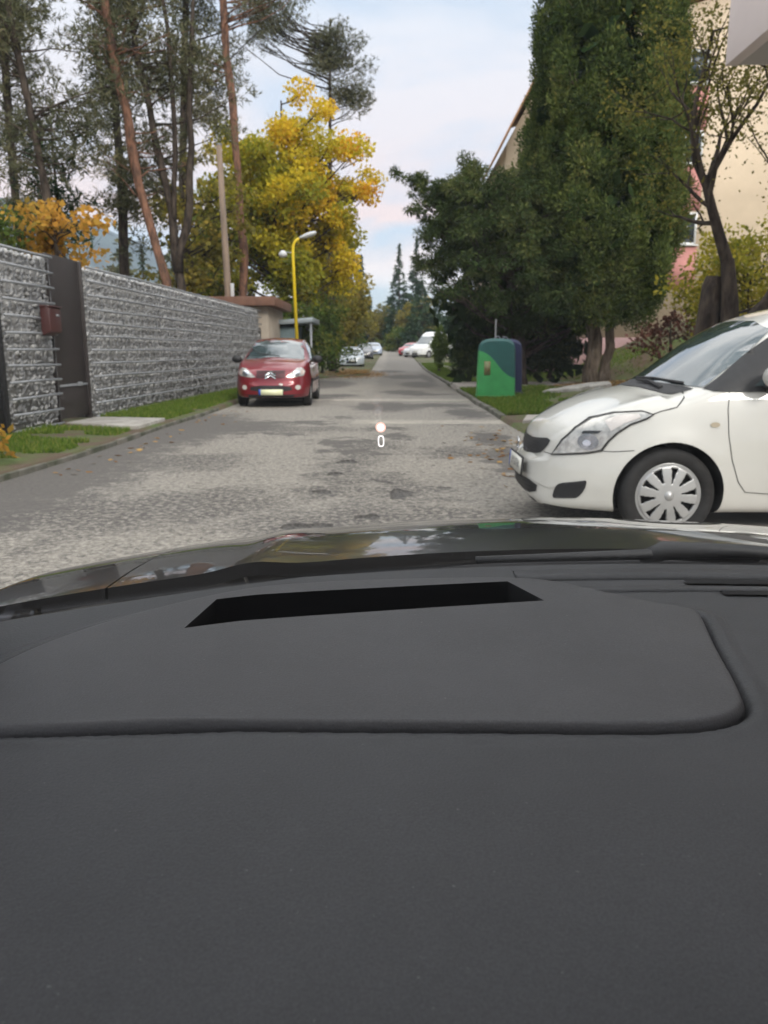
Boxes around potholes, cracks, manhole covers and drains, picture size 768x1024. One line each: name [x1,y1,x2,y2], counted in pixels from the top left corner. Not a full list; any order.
pothole [390,488,414,500]
